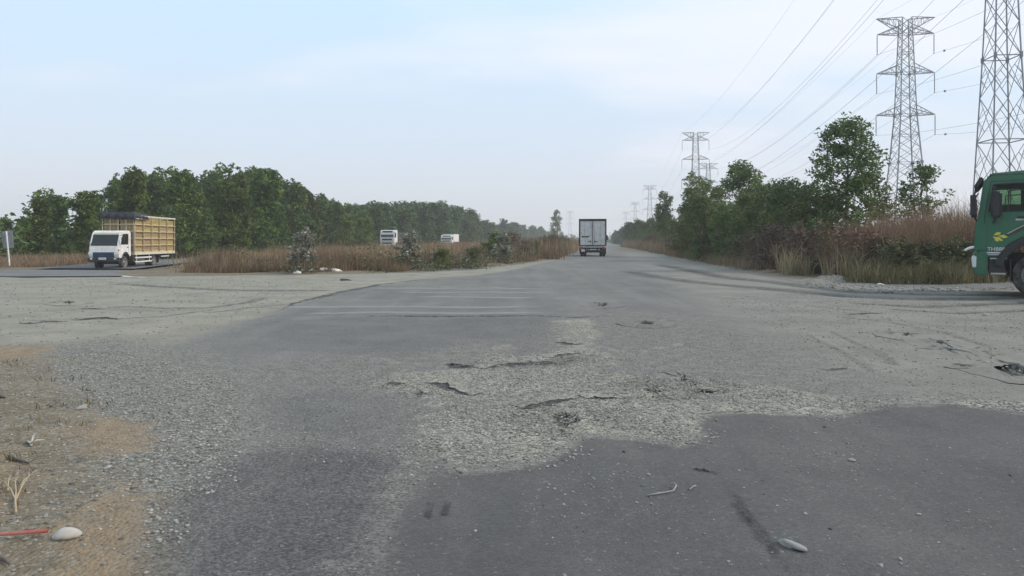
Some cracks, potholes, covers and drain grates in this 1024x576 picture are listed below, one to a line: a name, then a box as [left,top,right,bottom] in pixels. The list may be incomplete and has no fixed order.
pothole [649,370,721,394]
crack [22,308,127,324]
crack [388,342,580,395]
pothole [605,380,698,401]
